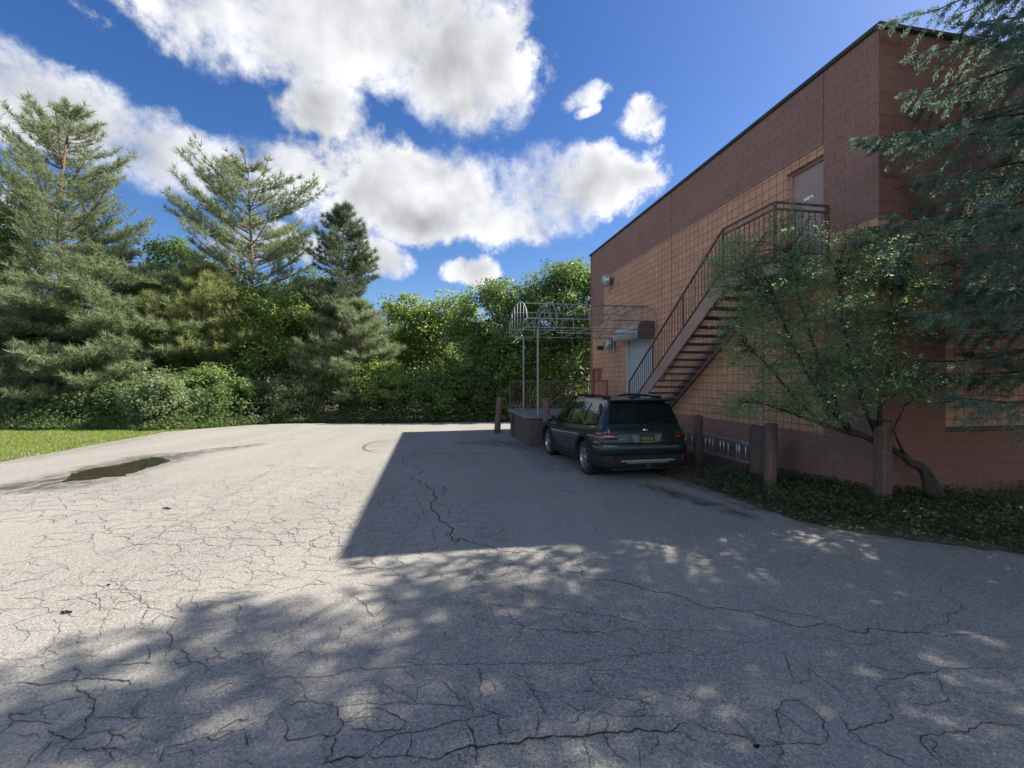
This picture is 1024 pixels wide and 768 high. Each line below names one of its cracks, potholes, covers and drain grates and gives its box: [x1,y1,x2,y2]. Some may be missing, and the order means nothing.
crack [0,436,1024,768]
